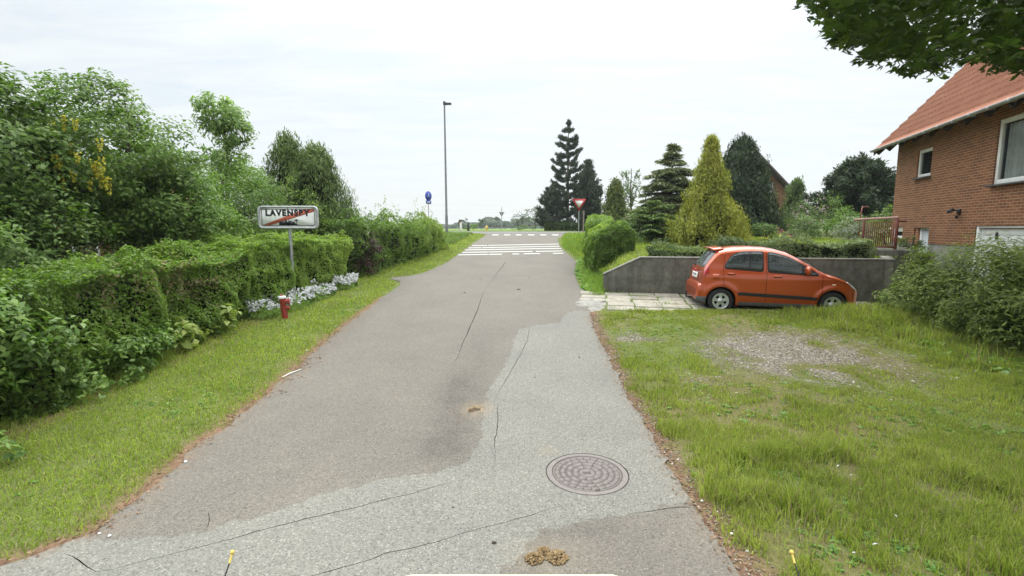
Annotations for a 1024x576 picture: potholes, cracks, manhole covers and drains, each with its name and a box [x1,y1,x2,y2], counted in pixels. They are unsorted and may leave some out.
crack [493,329,530,468]
crack [313,507,555,576]
crack [66,480,460,572]
manhole cover [546,454,629,496]
